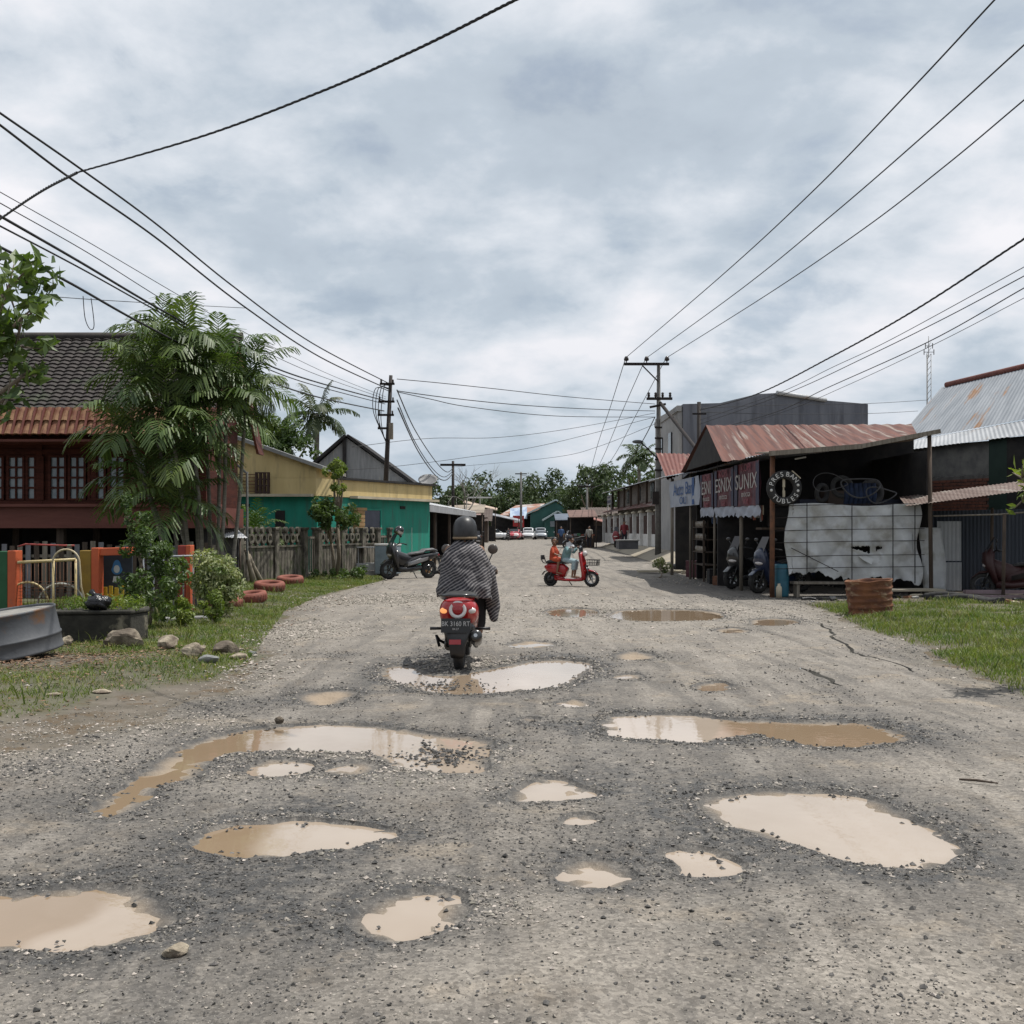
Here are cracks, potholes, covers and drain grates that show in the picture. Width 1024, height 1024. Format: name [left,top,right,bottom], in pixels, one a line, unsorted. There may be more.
pothole [379,658,595,695]
pothole [656,844,749,877]
pothole [506,775,602,802]
pothole [551,856,641,888]
pothole [345,886,472,943]
pothole [87,722,496,817]
pothole [187,816,402,859]
pothole [0,883,183,952]
pothole [697,788,969,870]
crack [801,623,914,686]
pothole [598,712,912,748]
pothole [295,689,361,705]
